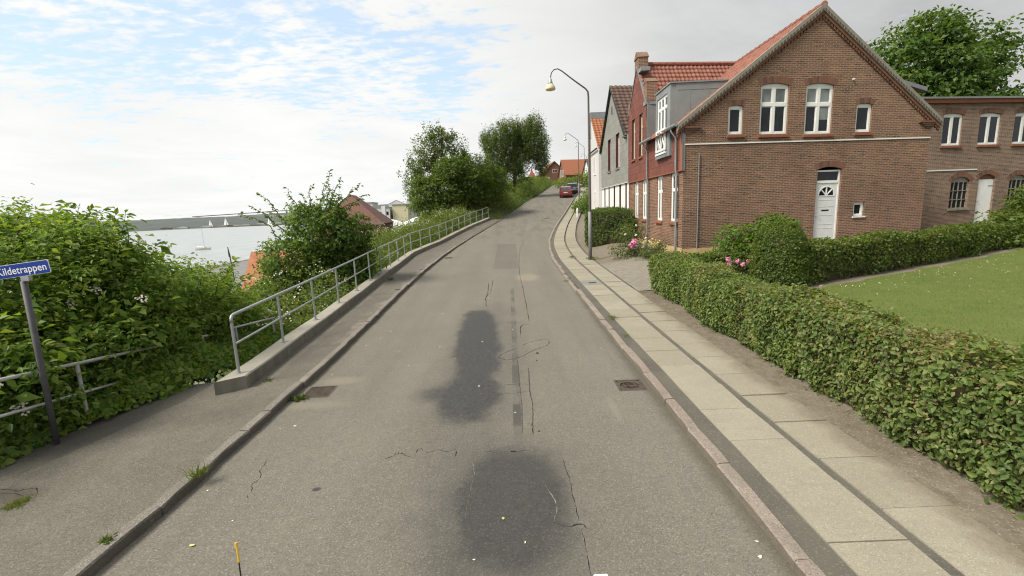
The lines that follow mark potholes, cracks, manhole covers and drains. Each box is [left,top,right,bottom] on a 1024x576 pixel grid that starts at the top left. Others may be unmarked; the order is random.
crack [494,322,550,433]
drain grate [304,385,338,398]
crack [388,442,526,514]
